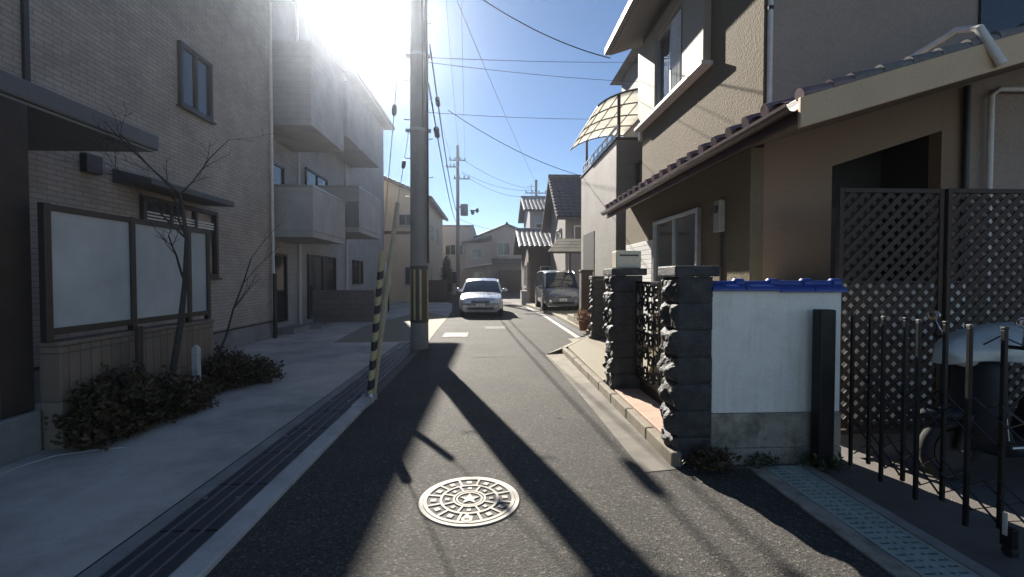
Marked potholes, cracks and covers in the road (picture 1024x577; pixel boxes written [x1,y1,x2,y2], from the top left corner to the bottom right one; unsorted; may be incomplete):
drain grate [763,466,981,577]
manhole cover [417,477,521,529]
